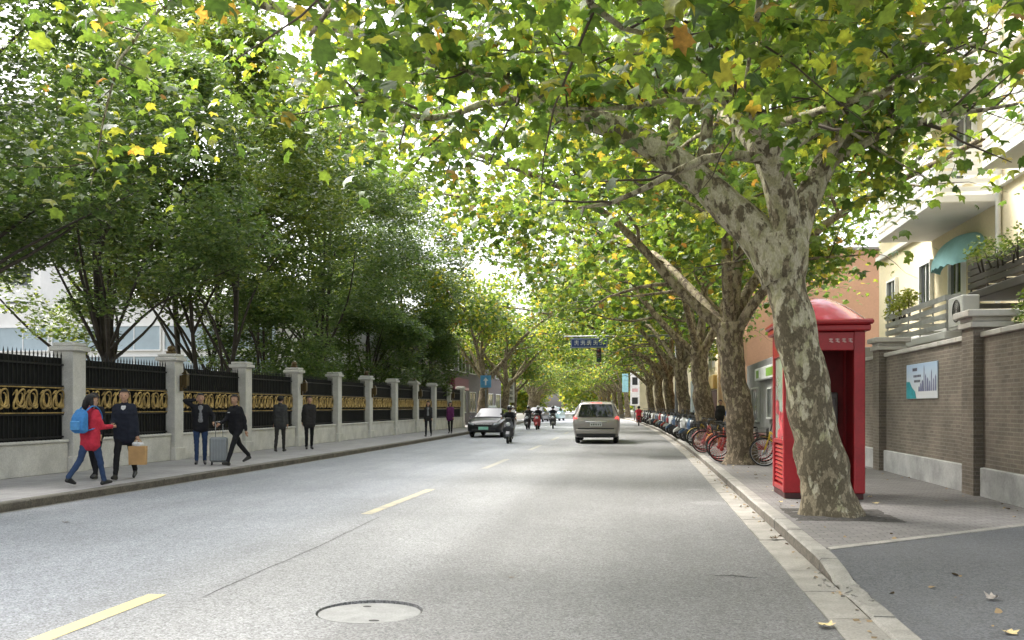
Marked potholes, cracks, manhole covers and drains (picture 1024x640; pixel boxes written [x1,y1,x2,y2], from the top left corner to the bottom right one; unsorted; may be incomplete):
manhole cover [318,603,421,624]
